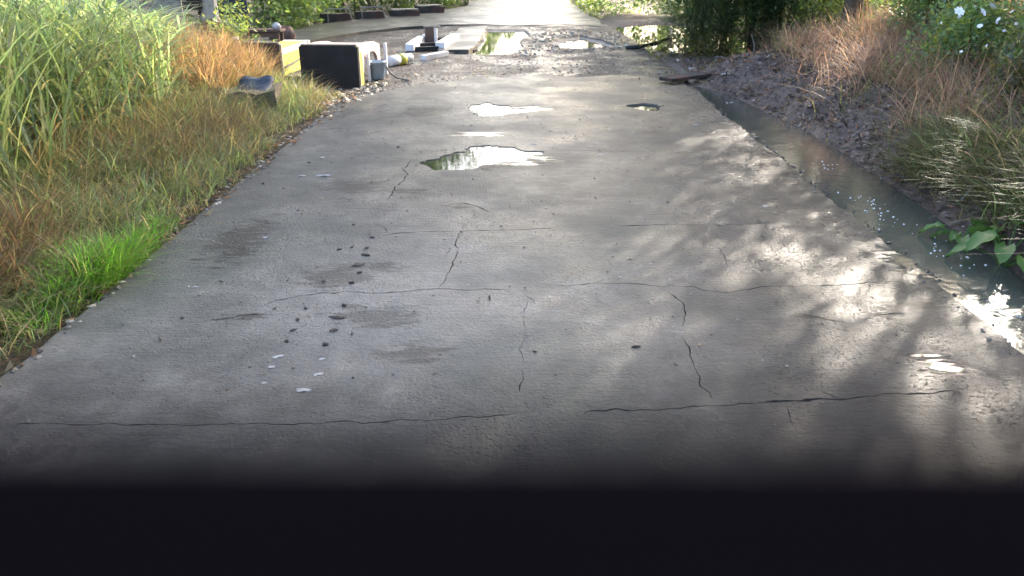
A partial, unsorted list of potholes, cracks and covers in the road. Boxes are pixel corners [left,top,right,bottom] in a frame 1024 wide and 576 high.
pothole [626,103,665,111]
pothole [469,102,533,116]
crack [215,219,550,320]
pothole [419,145,544,170]
crack [561,281,957,409]
